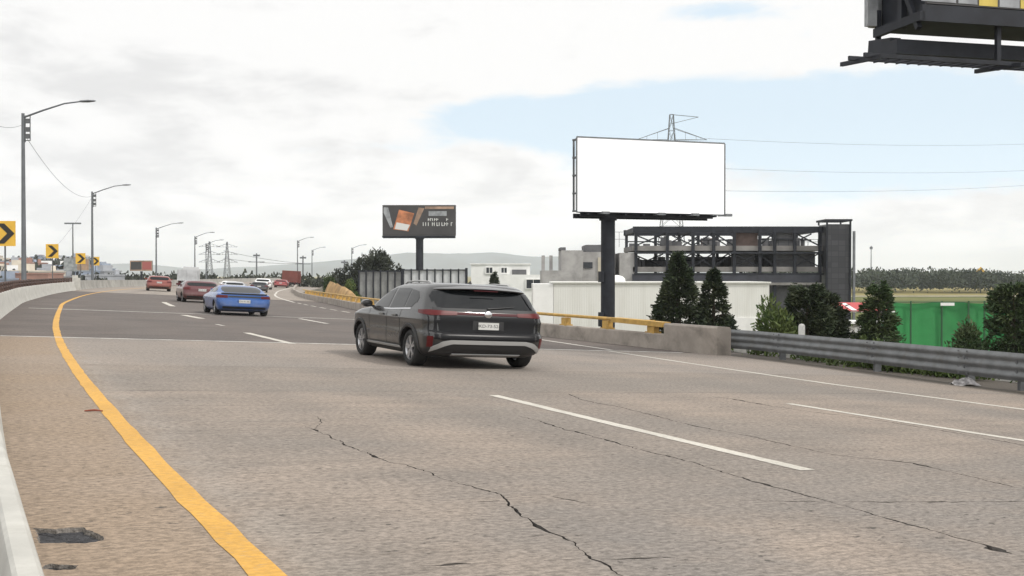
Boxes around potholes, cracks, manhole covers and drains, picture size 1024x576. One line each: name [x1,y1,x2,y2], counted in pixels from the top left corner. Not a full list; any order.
pothole [33,527,104,543]
crack [520,416,1017,553]
crack [569,394,1023,489]
crack [311,416,672,576]
